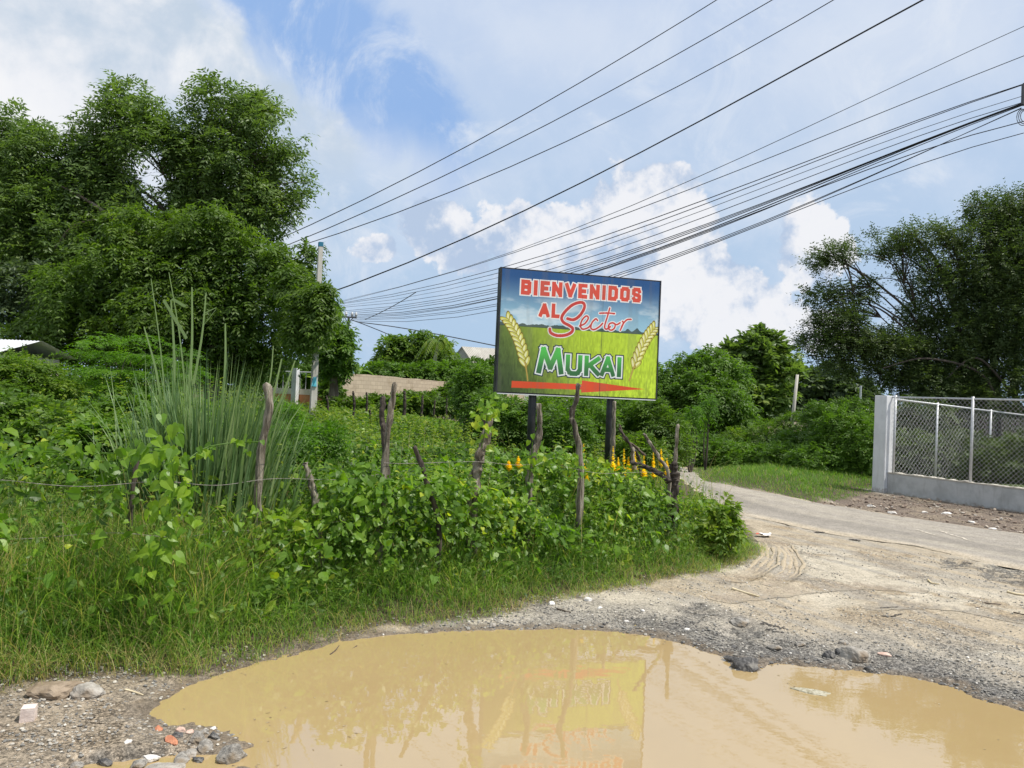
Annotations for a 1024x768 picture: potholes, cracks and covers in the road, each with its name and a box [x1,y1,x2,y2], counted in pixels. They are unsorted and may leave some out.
pothole [85,614,1024,768]
